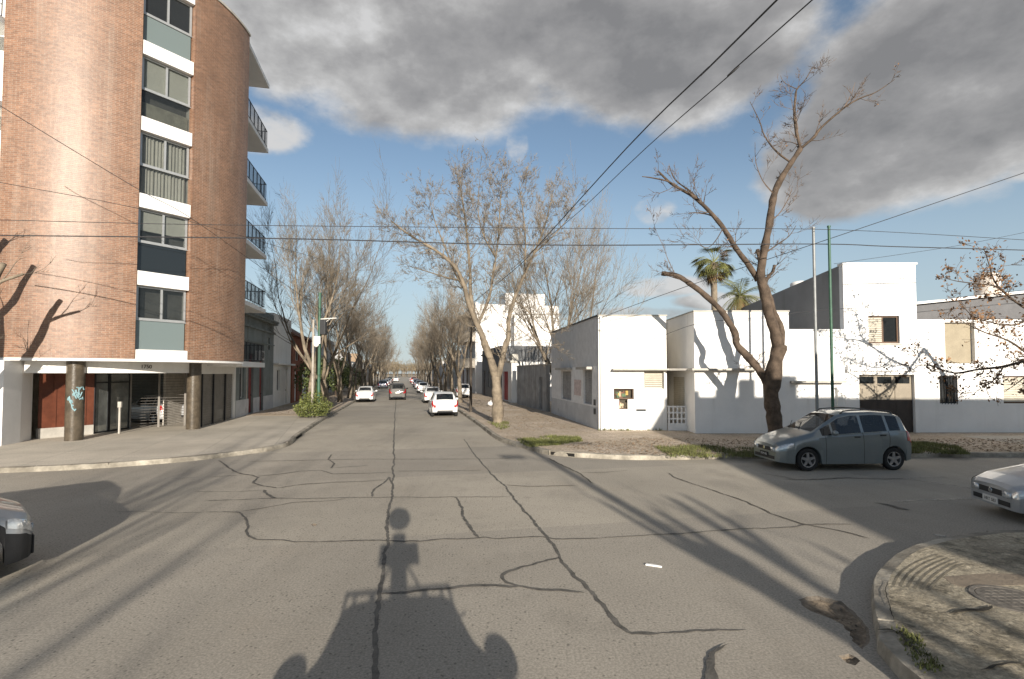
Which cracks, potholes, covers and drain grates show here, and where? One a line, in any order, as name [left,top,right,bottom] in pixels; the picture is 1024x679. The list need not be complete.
pothole [798,596,870,649]
crack [129,454,867,542]
crack [950,605,993,635]
manhole cover [967,585,1024,613]
